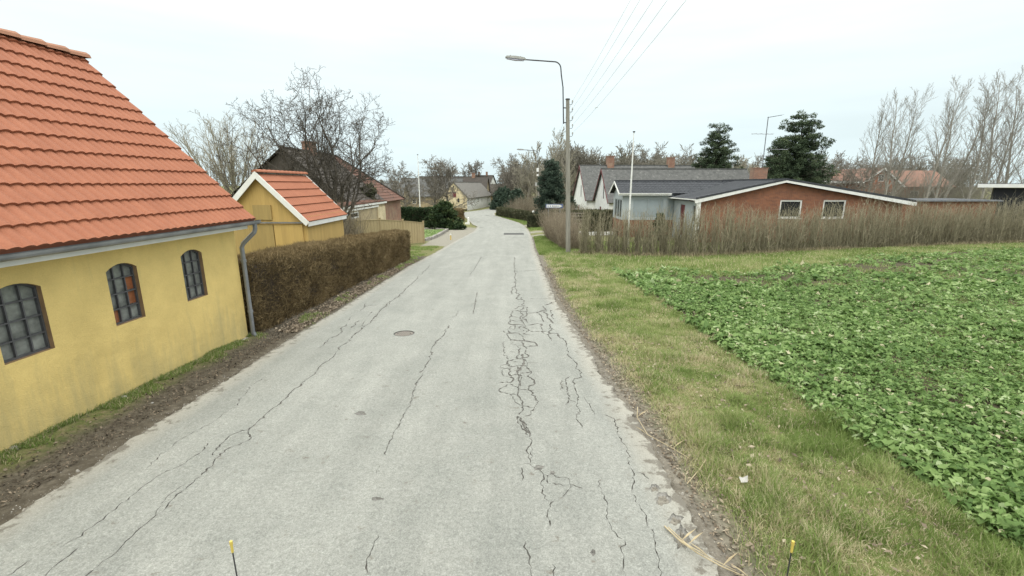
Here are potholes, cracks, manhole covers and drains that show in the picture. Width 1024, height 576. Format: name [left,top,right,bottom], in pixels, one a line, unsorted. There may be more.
crack [498,257,662,576]
crack [45,265,430,576]
